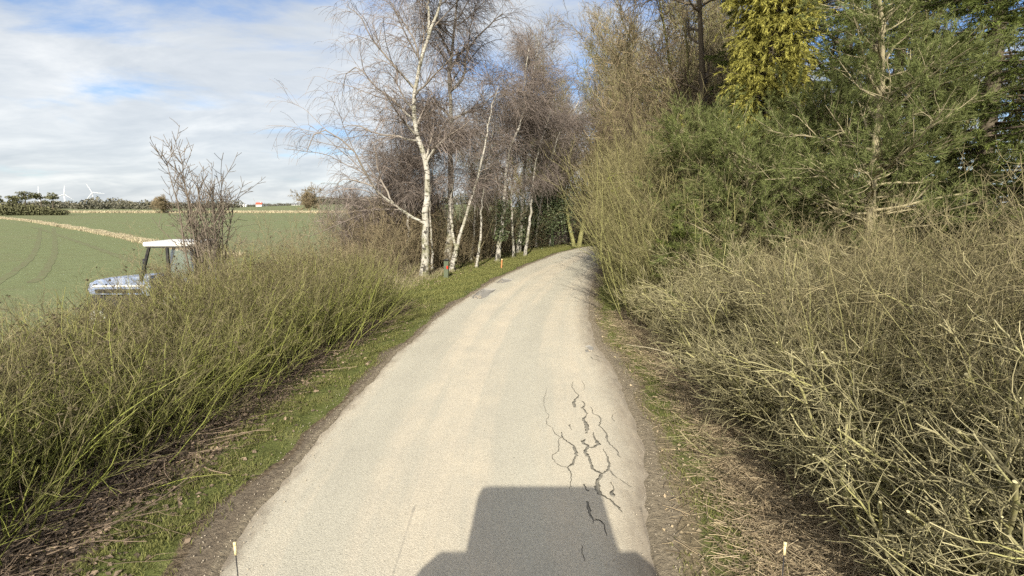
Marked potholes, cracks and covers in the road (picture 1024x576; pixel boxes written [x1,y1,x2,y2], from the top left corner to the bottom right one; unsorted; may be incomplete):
crack [543,382,631,561]
